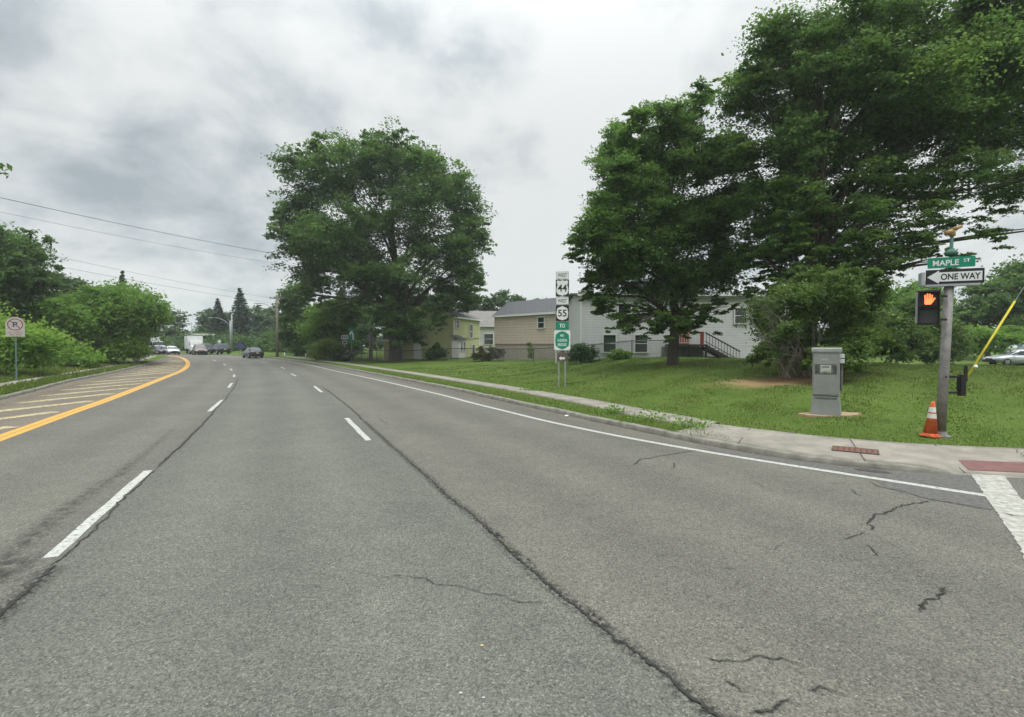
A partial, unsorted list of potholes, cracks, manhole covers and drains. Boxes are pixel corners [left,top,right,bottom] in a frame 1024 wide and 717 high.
crack [901,584,958,610]
crack [707,654,856,716]
crack [837,481,987,554]
crack [372,574,537,603]
